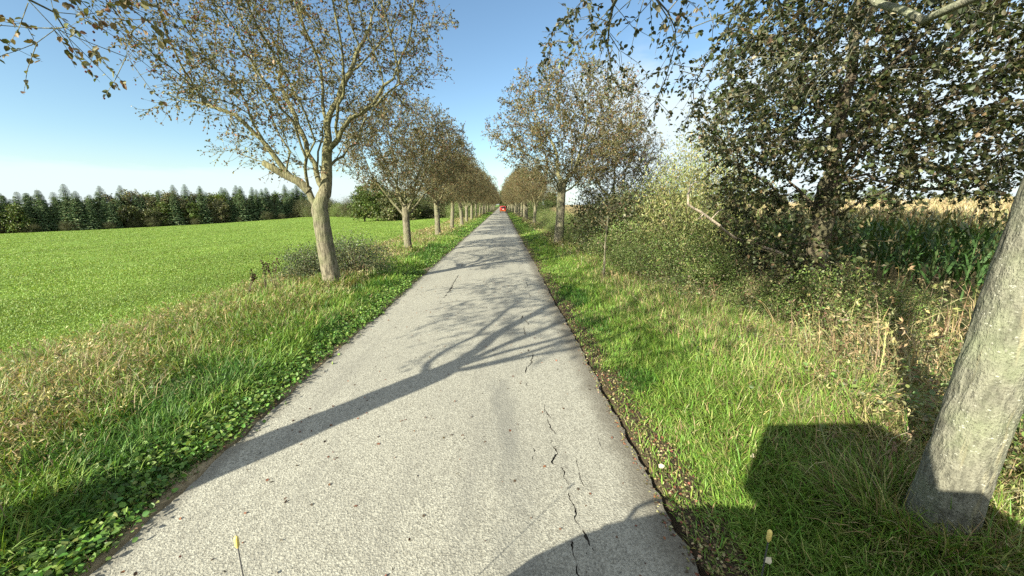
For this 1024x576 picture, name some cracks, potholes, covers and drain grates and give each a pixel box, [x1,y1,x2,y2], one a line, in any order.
crack [531,404,594,576]
